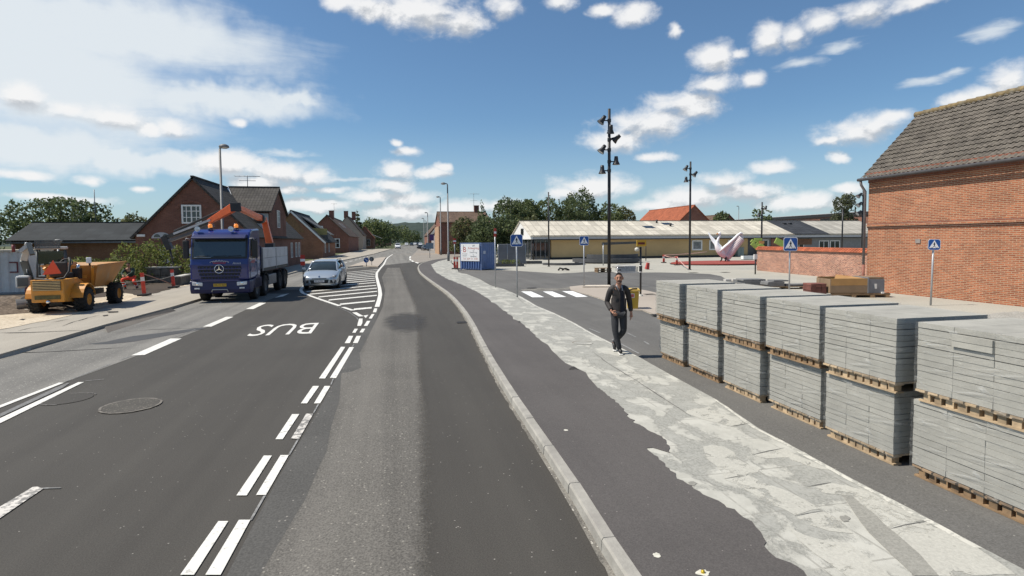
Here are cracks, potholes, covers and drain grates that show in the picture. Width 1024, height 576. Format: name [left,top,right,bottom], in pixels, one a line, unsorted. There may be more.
manhole cover [98,398,163,414]
